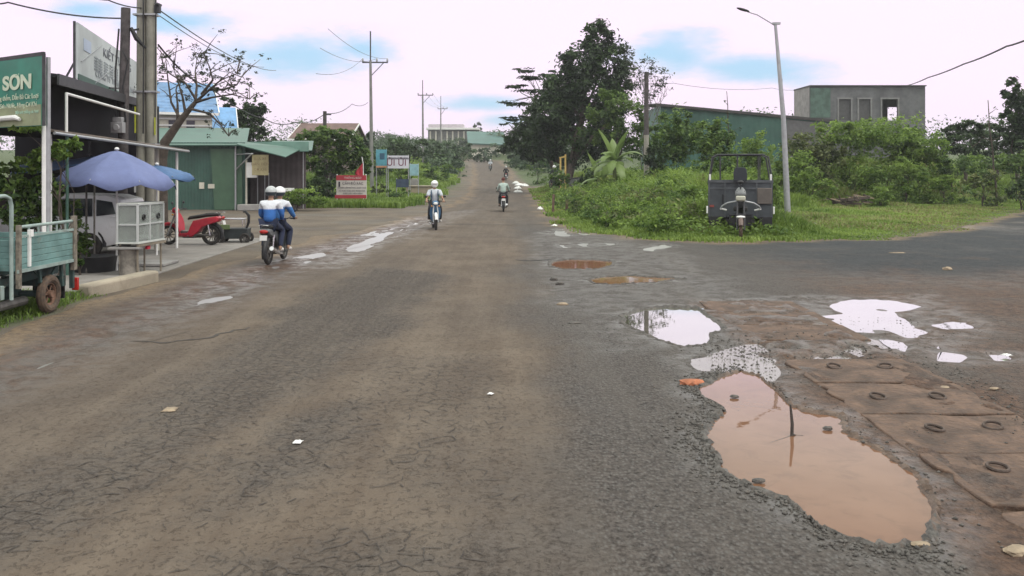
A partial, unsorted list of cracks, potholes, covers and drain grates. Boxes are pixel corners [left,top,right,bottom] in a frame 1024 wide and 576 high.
pothole [583,274,687,285]
pothole [547,258,617,270]
pothole [694,368,942,552]
pothole [618,304,727,347]
